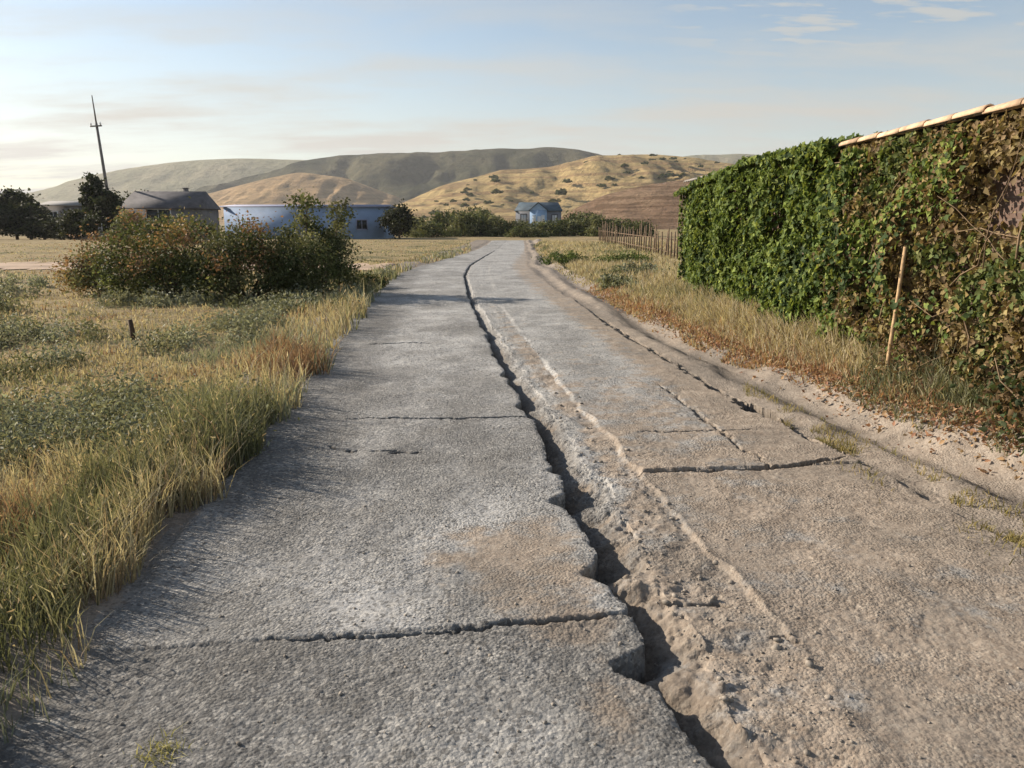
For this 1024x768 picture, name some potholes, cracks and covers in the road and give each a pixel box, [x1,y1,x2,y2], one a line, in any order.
crack [269,252,849,768]
